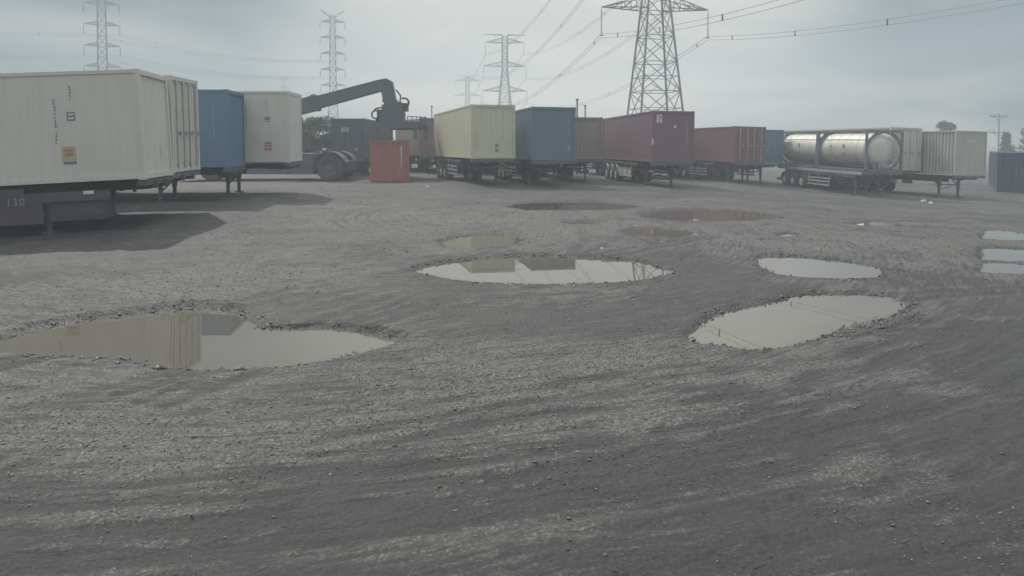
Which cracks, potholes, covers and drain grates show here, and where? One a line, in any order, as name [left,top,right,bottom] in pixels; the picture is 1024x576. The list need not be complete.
pothole [610,226,707,238]
pothole [430,232,537,251]
pothole [495,199,649,211]
pothole [0,297,428,378]
pothole [668,288,925,353]
pothole [968,245,1024,263]
pothole [630,207,790,223]
pothole [967,259,1024,276]
pothole [743,252,900,281]
pothole [971,230,1024,241]
pothole [396,251,696,288]
